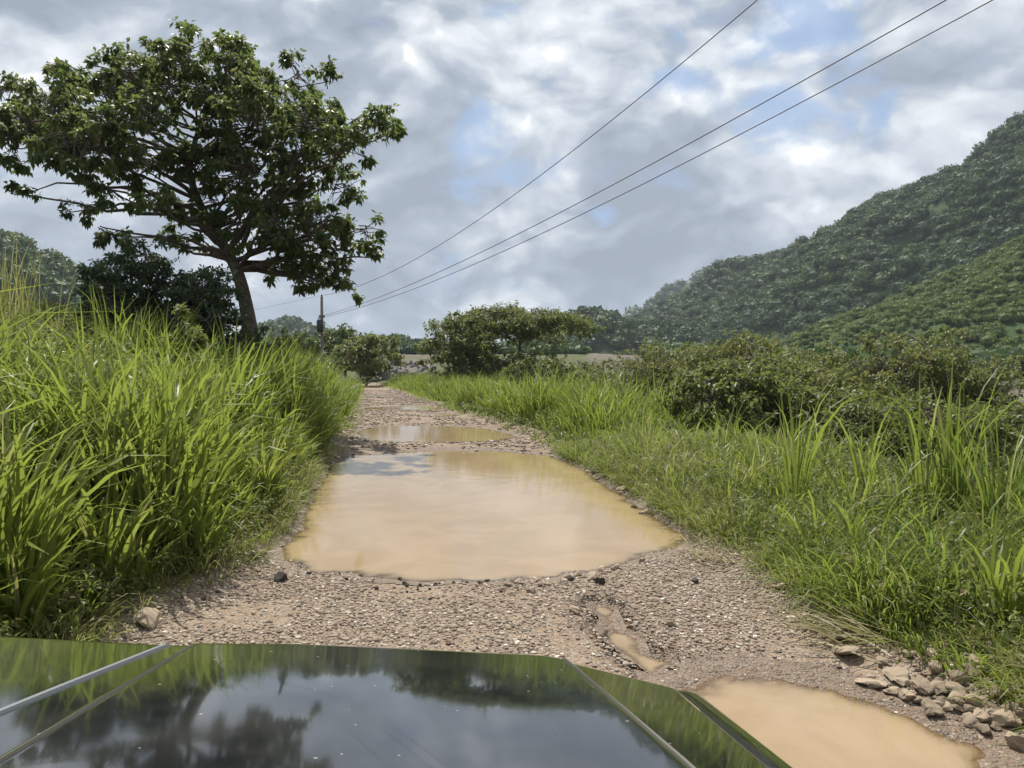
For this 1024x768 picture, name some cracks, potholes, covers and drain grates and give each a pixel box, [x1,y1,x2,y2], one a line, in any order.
pothole [260,448,702,586]
pothole [348,424,527,443]
pothole [634,648,1024,768]
